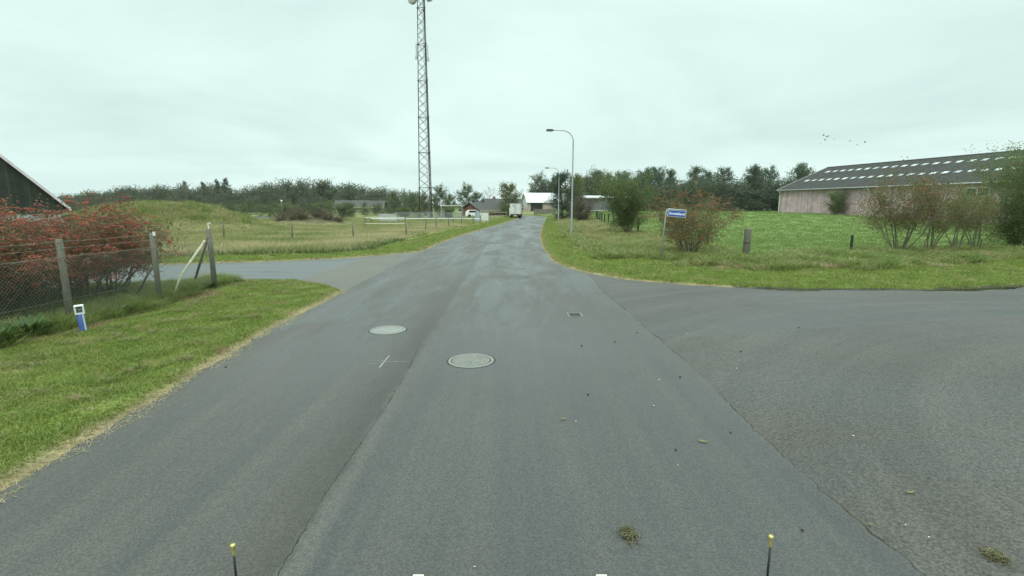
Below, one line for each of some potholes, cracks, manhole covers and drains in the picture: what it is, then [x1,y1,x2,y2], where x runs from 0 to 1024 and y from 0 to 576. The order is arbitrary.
manhole cover [368,325,407,335]
manhole cover [446,353,496,369]
